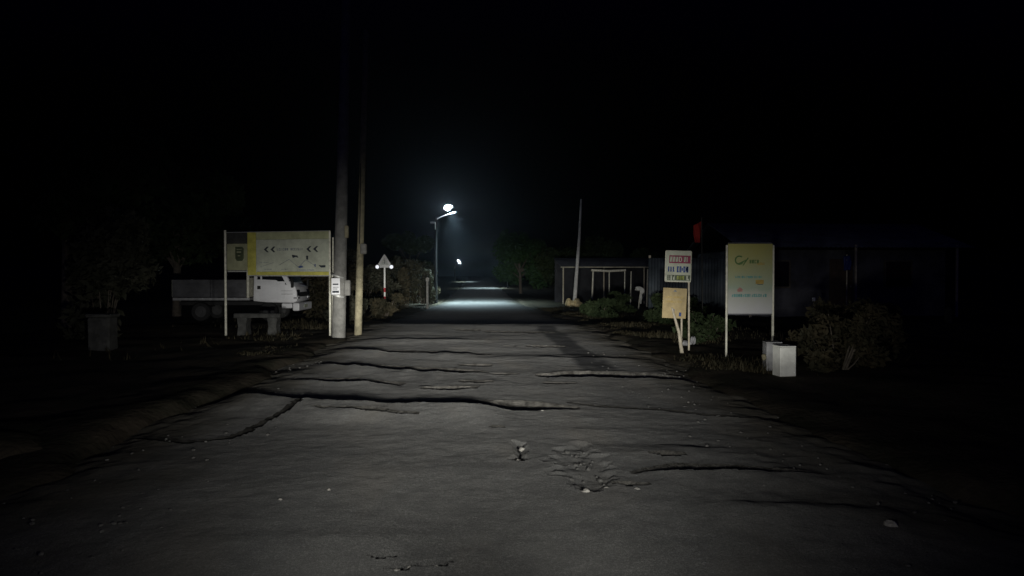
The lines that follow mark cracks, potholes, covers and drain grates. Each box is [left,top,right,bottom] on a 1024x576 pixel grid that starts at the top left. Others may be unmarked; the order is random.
crack [133,398,303,444]
pothole [538,440,626,492]
pothole [507,440,531,461]
